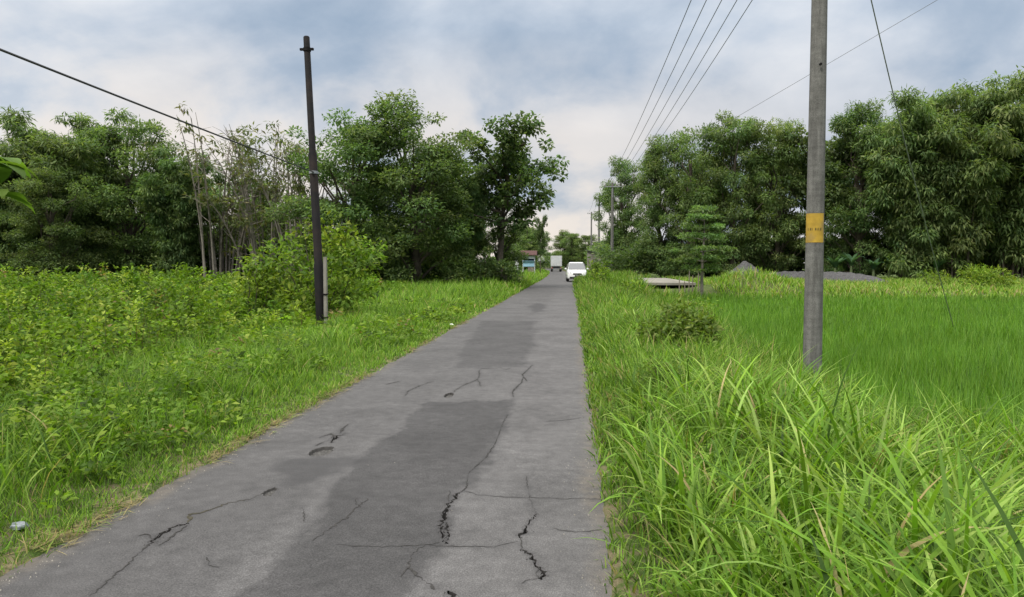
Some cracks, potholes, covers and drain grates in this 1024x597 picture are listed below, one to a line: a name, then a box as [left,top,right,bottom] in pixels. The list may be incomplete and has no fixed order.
crack [303,416,602,597]
crack [451,366,531,397]
crack [90,494,262,595]
